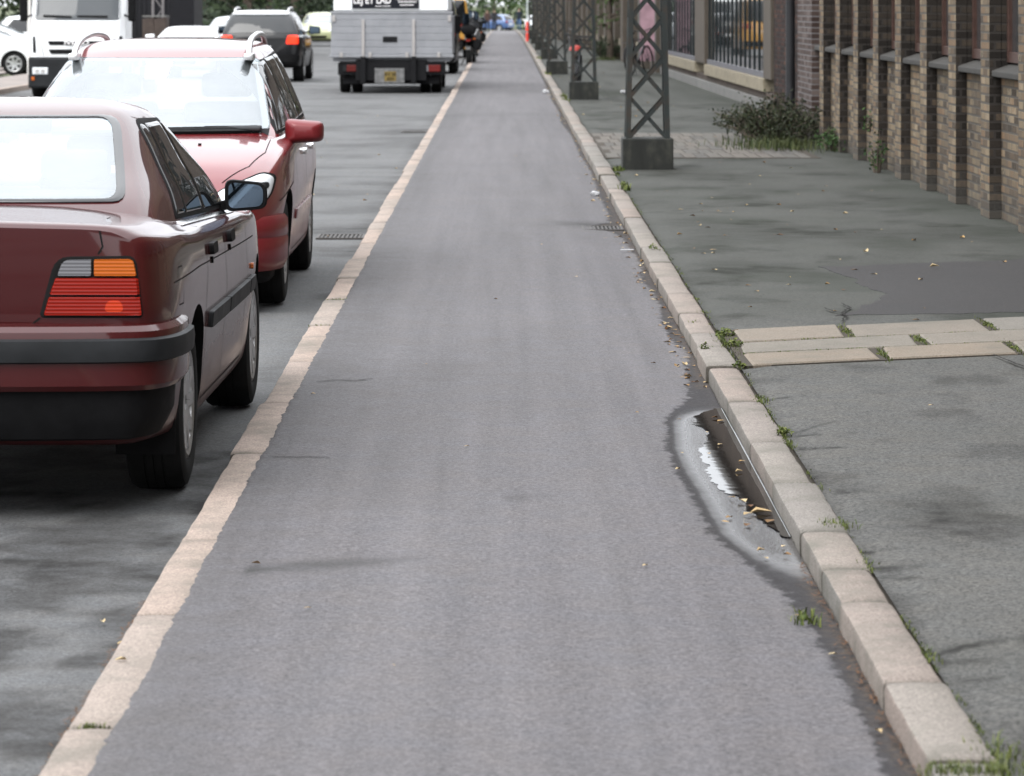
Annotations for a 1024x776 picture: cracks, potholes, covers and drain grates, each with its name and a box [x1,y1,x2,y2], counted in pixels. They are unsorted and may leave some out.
crack [824,303,852,321]
